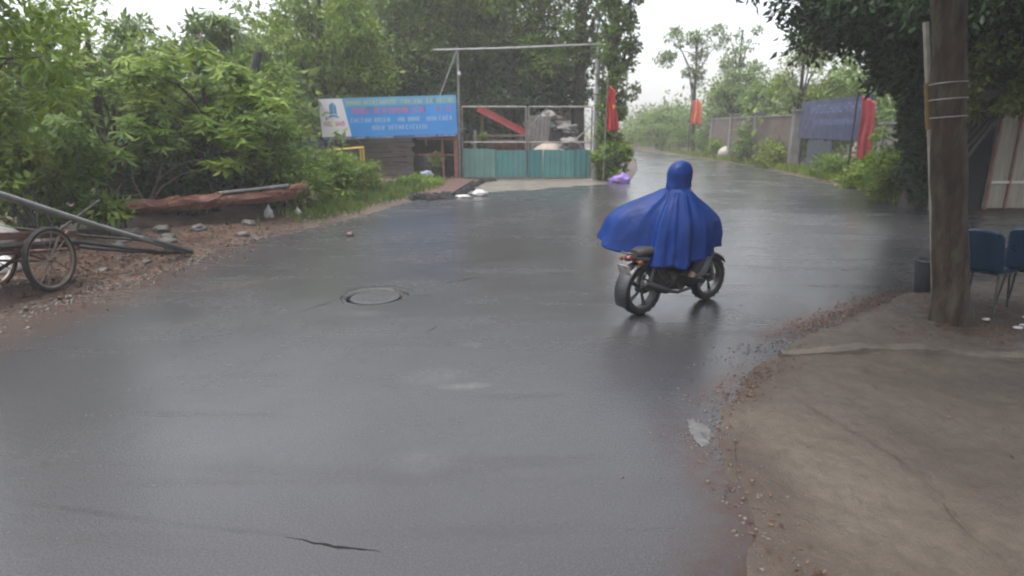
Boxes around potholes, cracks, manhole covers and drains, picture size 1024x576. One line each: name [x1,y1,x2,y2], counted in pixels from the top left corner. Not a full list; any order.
crack [287,537,380,552]
manhole cover [340,288,409,306]
